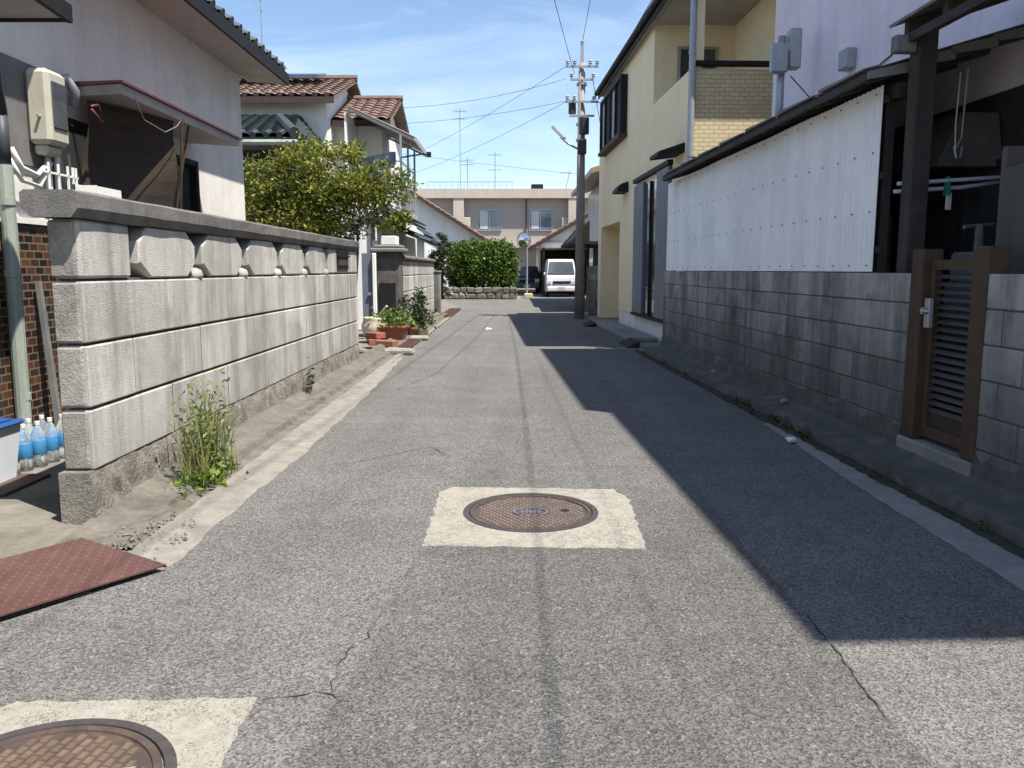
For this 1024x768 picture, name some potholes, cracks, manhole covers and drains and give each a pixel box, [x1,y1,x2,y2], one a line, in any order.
manhole cover [0,697,257,768]
crack [258,551,420,710]
